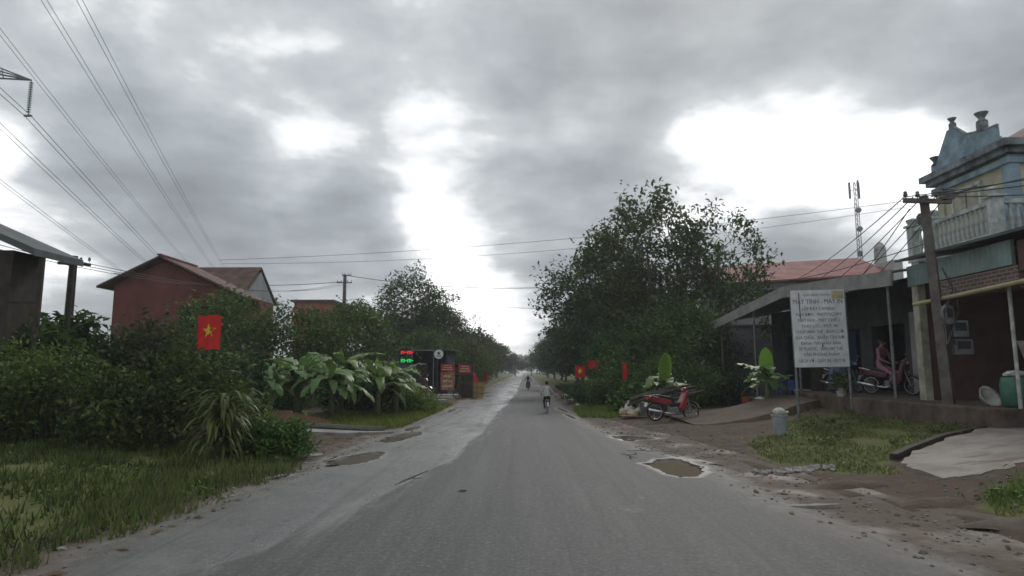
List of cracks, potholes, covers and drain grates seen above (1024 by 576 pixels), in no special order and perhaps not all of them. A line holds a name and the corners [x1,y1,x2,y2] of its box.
pothole [374,431,423,443]
pothole [642,458,704,477]
pothole [323,451,385,467]
